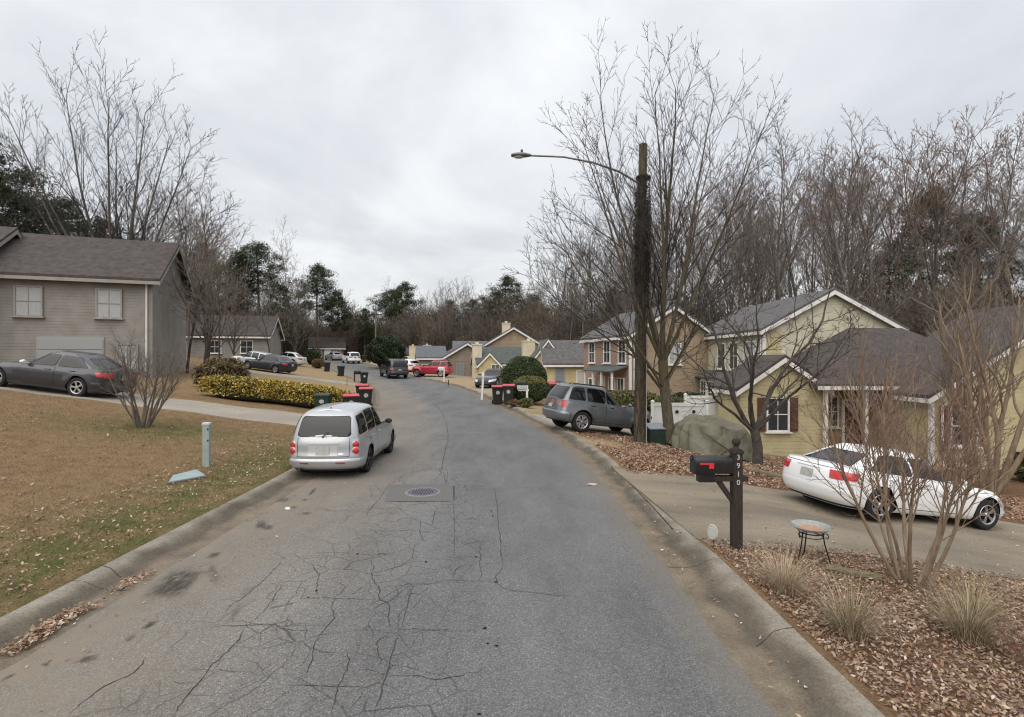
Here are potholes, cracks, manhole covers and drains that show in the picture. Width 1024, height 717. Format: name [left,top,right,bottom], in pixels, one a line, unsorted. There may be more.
crack [174,411,568,714]
manhole cover [405,487,441,497]
crack [69,657,146,714]
